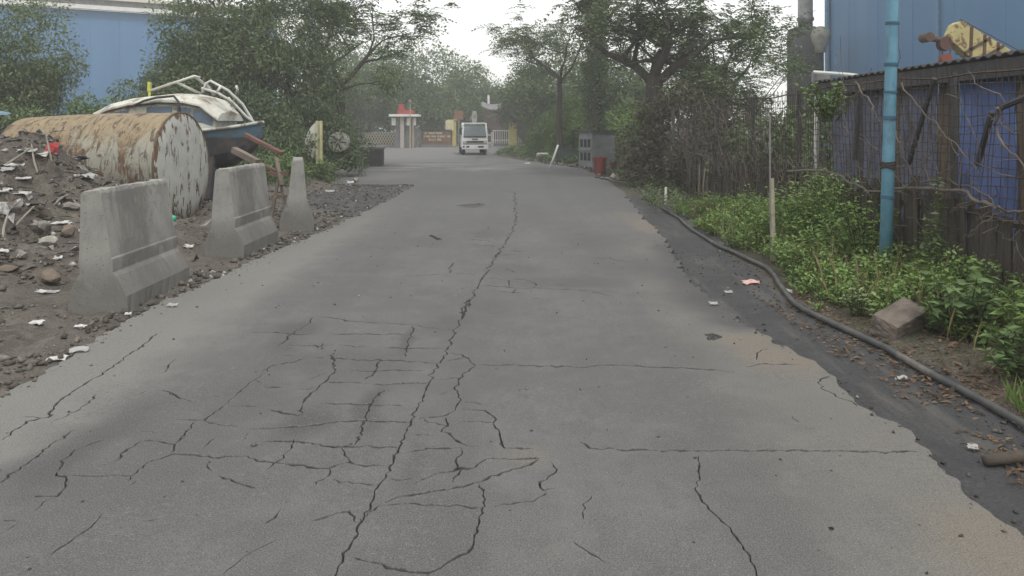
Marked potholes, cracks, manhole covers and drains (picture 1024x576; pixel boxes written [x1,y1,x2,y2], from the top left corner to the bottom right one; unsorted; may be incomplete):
crack [0,191,798,576]
crack [817,376,857,406]
crack [578,441,918,576]
